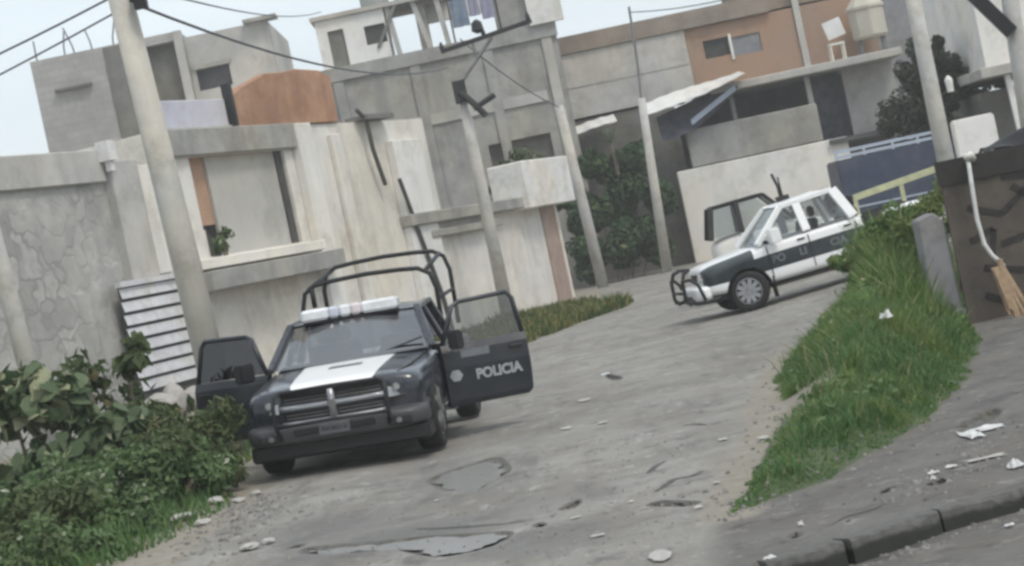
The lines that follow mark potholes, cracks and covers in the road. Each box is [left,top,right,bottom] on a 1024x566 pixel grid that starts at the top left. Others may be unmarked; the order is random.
pothole [635,497,713,510]
pothole [282,527,532,562]
pothole [598,372,630,382]
pothole [413,454,526,496]
crack [646,461,704,492]
